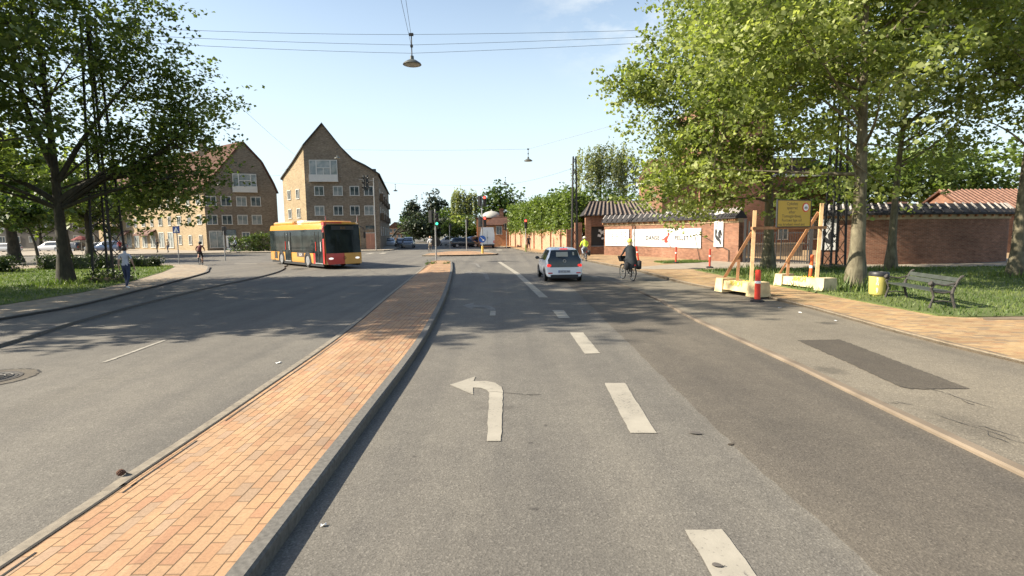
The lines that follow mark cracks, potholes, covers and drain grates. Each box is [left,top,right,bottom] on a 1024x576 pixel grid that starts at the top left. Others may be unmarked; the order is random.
manhole cover [0,368,41,385]
crack [891,386,1024,443]
